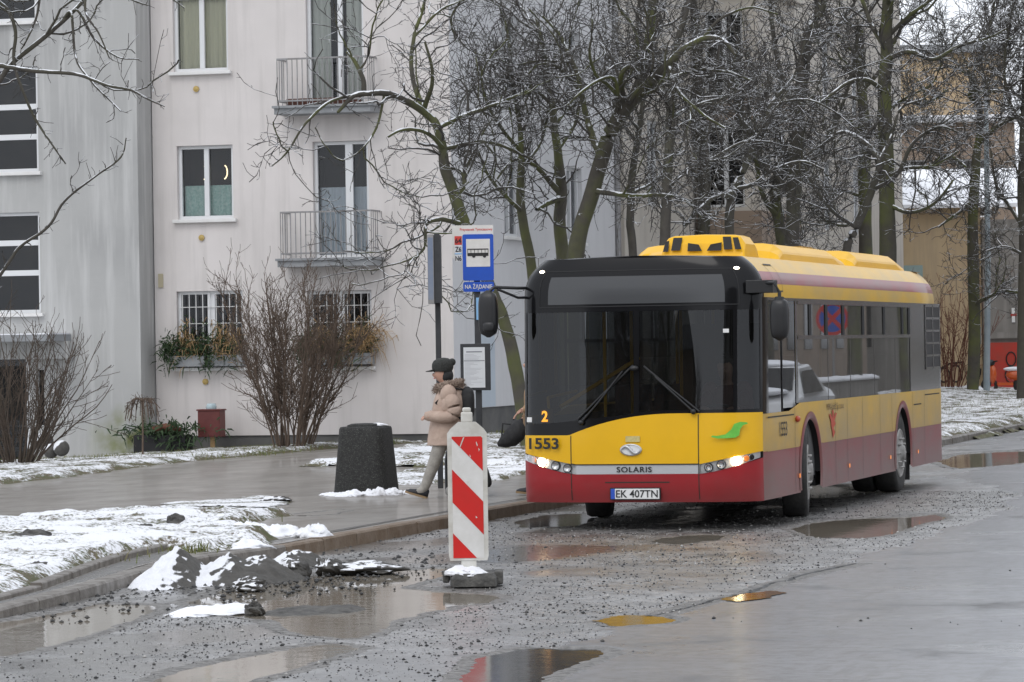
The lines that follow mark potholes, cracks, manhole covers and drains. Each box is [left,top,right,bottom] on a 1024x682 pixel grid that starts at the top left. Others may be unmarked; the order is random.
pothole [930,449,1024,469]
pothole [440,646,624,682]
pothole [584,615,691,627]
pothole [778,513,954,539]
pothole [505,513,608,528]
pothole [169,566,516,640]
pothole [639,533,735,545]
pothole [0,601,172,658]
